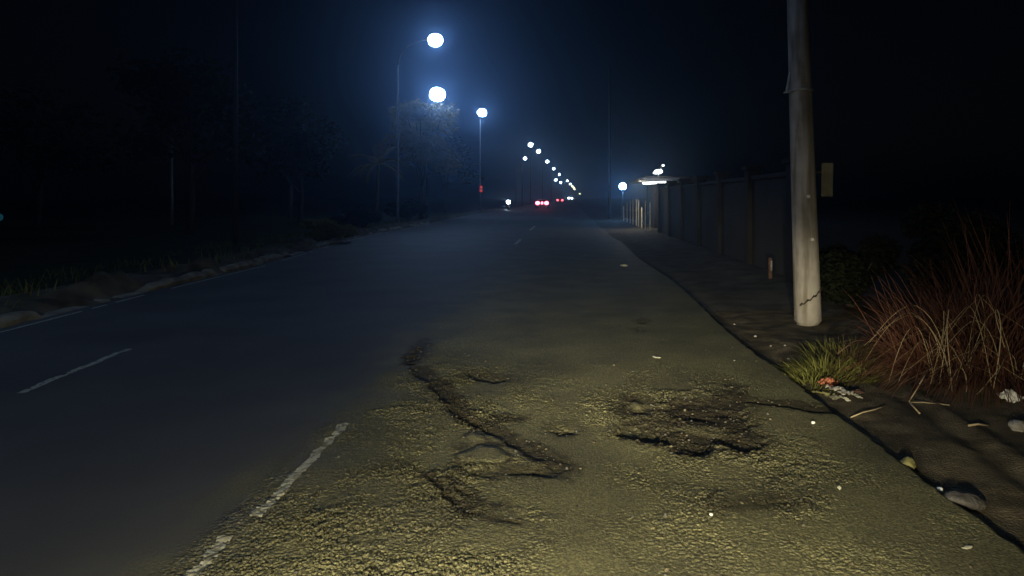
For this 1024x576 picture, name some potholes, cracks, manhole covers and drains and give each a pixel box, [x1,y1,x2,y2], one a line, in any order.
crack [743,396,834,414]
pothole [547,421,583,438]
pothole [611,382,772,458]
